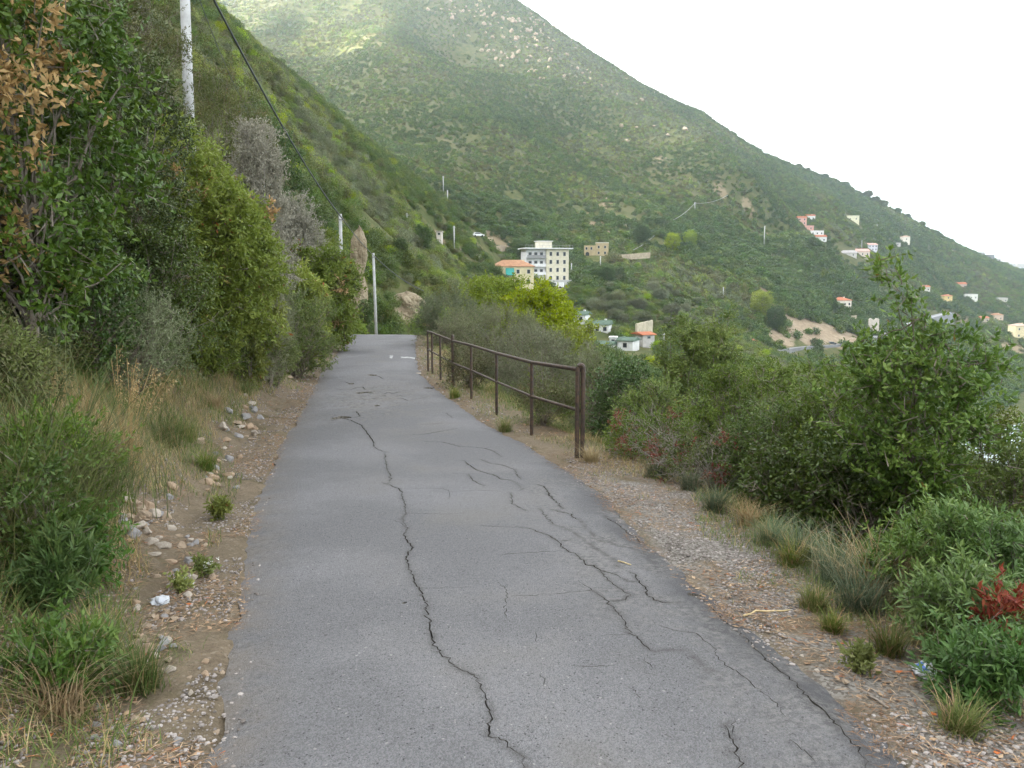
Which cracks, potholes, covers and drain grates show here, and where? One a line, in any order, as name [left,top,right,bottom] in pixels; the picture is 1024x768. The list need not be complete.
crack [482,485,869,765]
crack [331,377,525,767]
